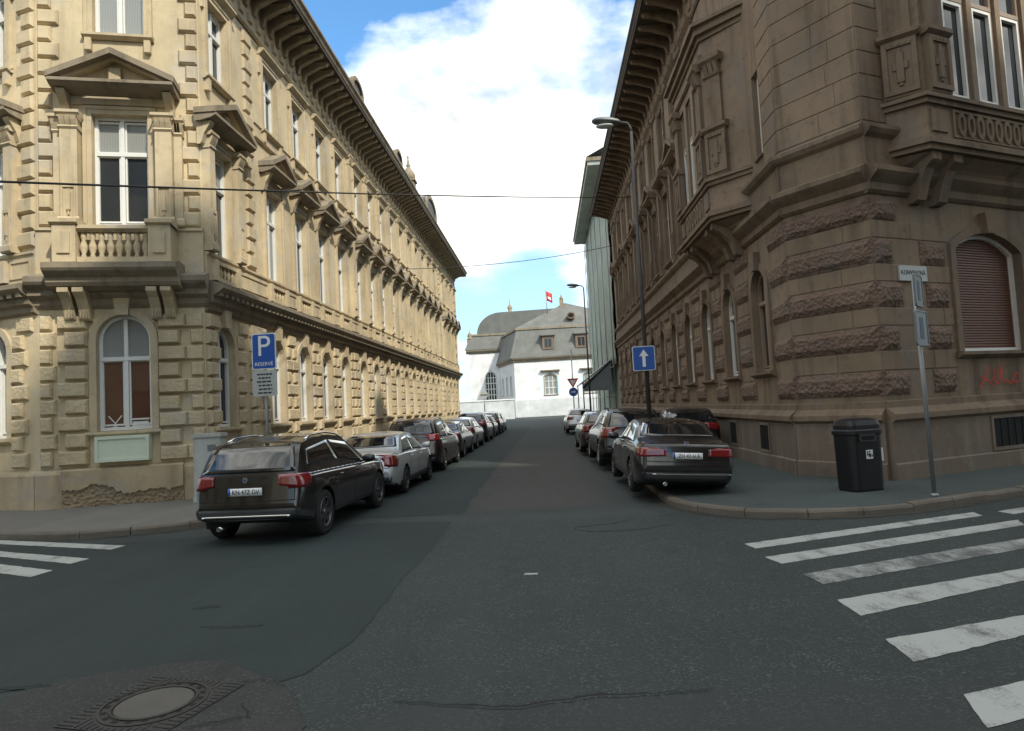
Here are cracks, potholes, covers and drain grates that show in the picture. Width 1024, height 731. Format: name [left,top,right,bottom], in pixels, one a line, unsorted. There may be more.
crack [181,678,285,729]
manhole cover [52,676,245,731]
crack [574,520,674,532]
